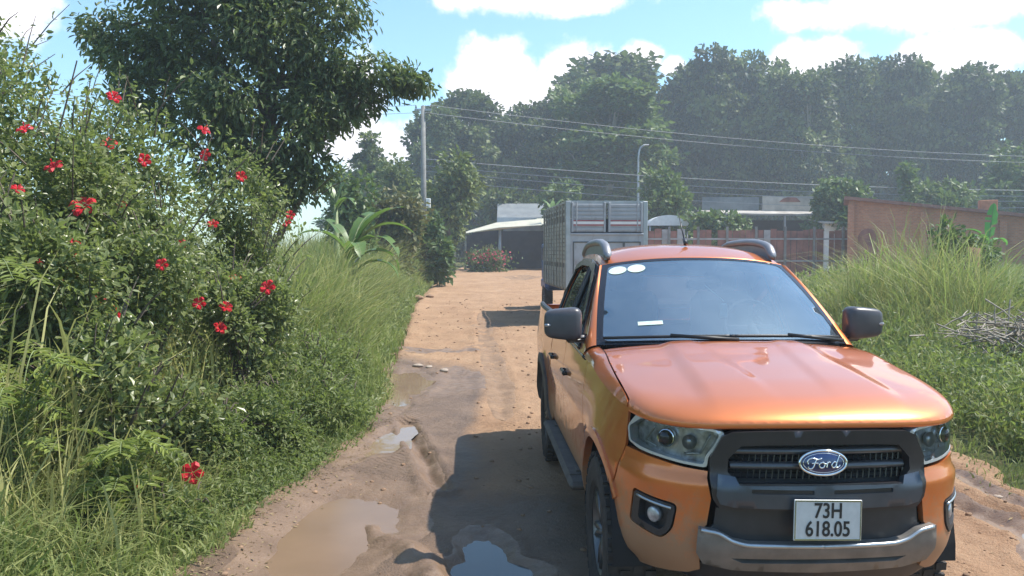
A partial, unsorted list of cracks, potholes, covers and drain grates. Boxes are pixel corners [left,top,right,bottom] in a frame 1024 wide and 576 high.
pothole [432,524,560,576]
pothole [222,470,434,576]
pothole [365,362,436,416]
